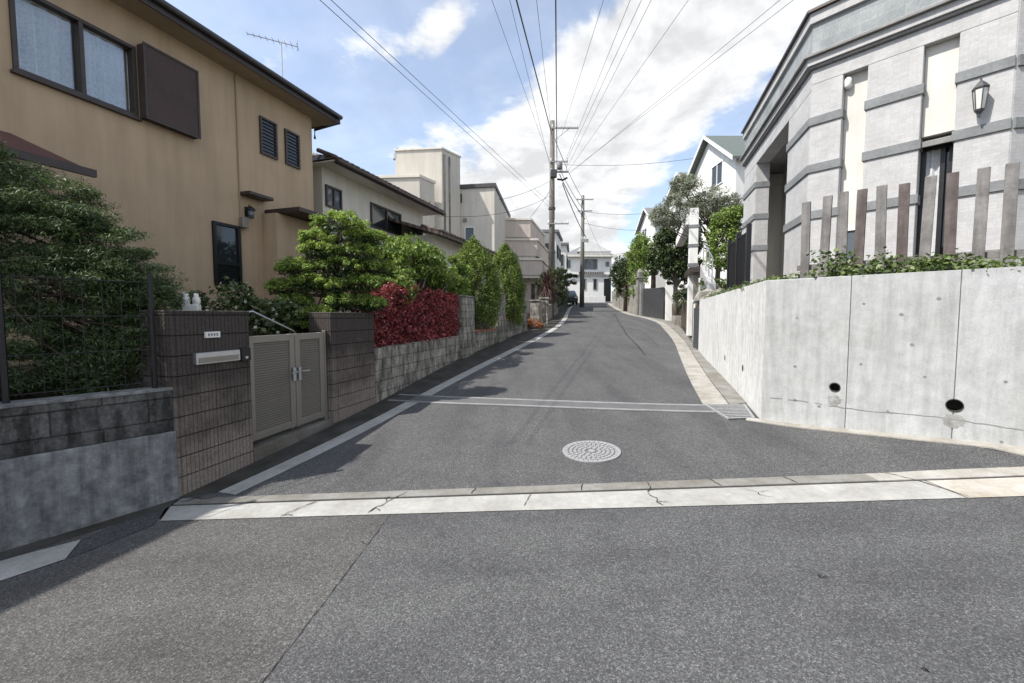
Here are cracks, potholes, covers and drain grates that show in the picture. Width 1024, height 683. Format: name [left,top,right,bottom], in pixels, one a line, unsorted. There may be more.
crack [261,492,406,683]
drain grate [704,404,755,420]
manhole cover [562,441,621,463]
